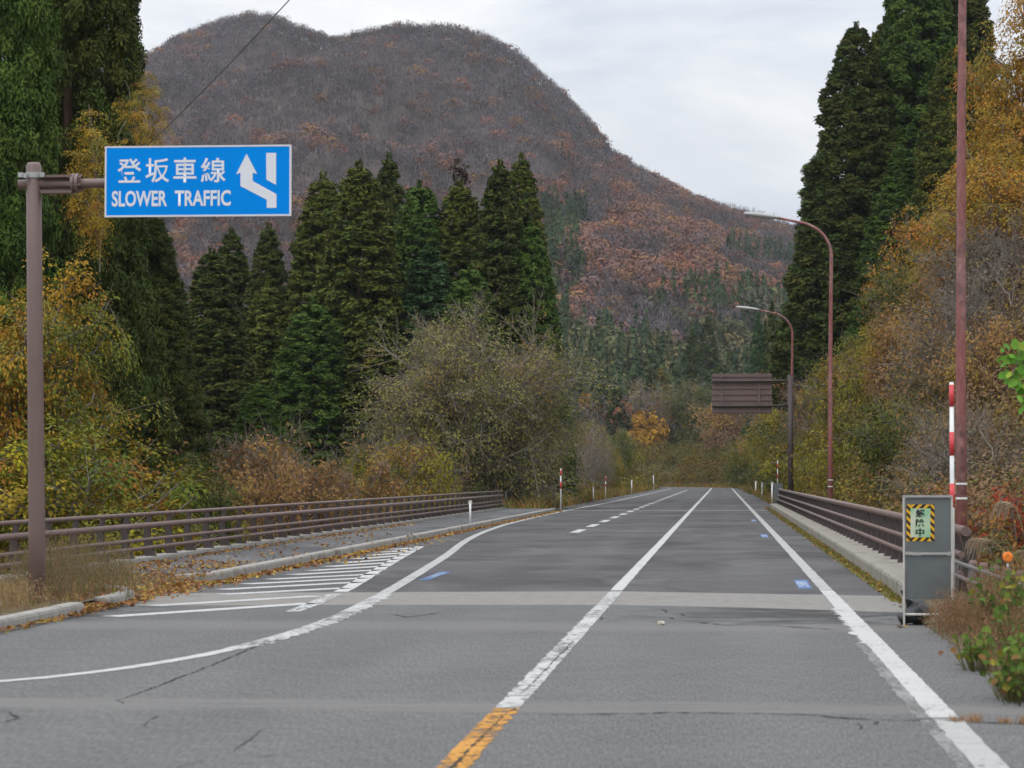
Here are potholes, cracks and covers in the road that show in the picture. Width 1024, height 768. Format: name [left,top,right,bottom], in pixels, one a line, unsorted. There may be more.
crack [115,640,275,703]
